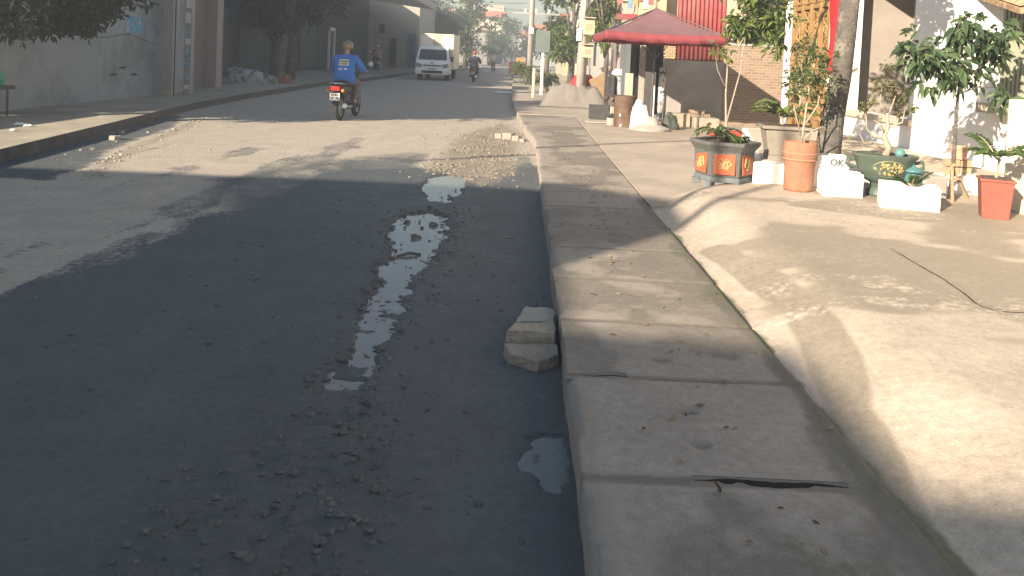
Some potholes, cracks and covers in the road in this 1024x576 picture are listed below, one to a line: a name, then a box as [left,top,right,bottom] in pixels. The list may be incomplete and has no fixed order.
pothole [508,433,573,495]
pothole [311,209,459,402]
crack [687,475,857,495]
pothole [417,174,469,204]
